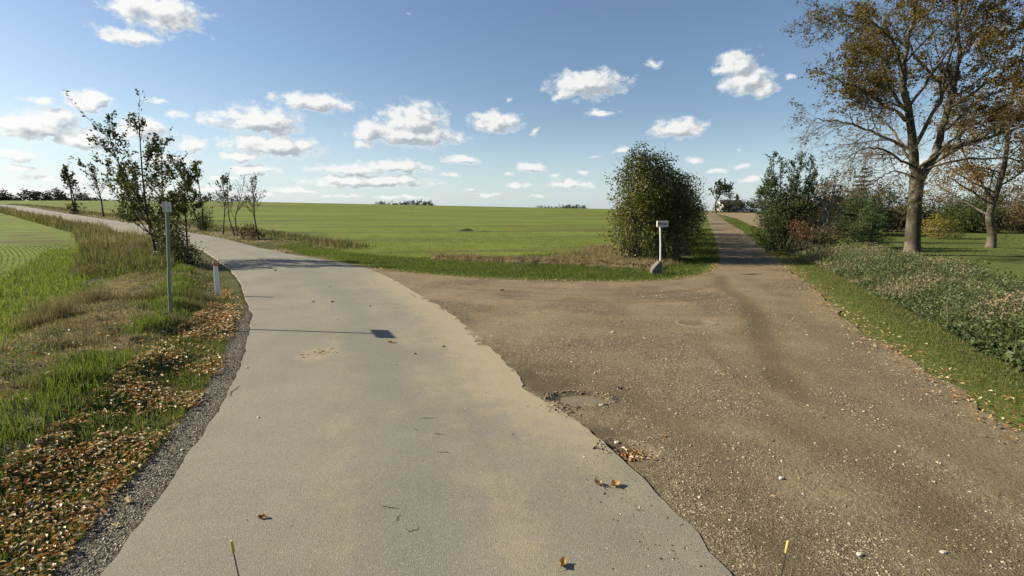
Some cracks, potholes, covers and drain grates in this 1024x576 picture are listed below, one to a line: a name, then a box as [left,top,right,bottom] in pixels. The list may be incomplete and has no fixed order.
pothole [545,389,616,407]
pothole [600,436,665,467]
